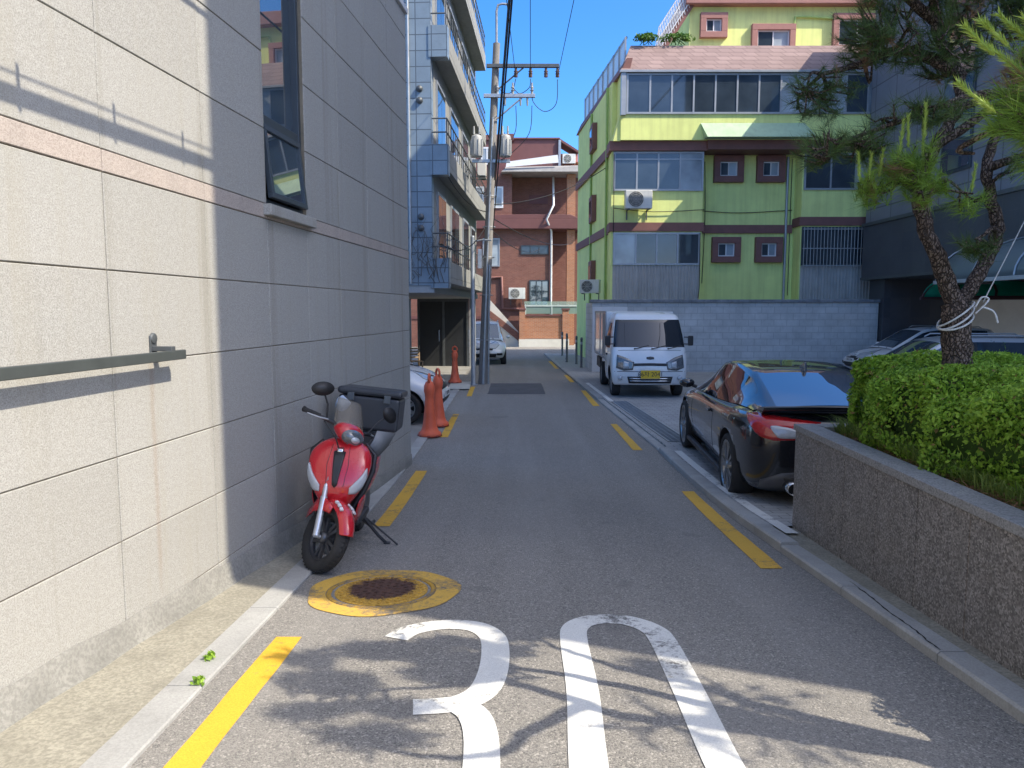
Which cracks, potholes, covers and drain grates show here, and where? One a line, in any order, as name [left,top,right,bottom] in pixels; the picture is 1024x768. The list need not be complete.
manhole cover [326,575,436,608]
drain grate [611,401,681,442]
